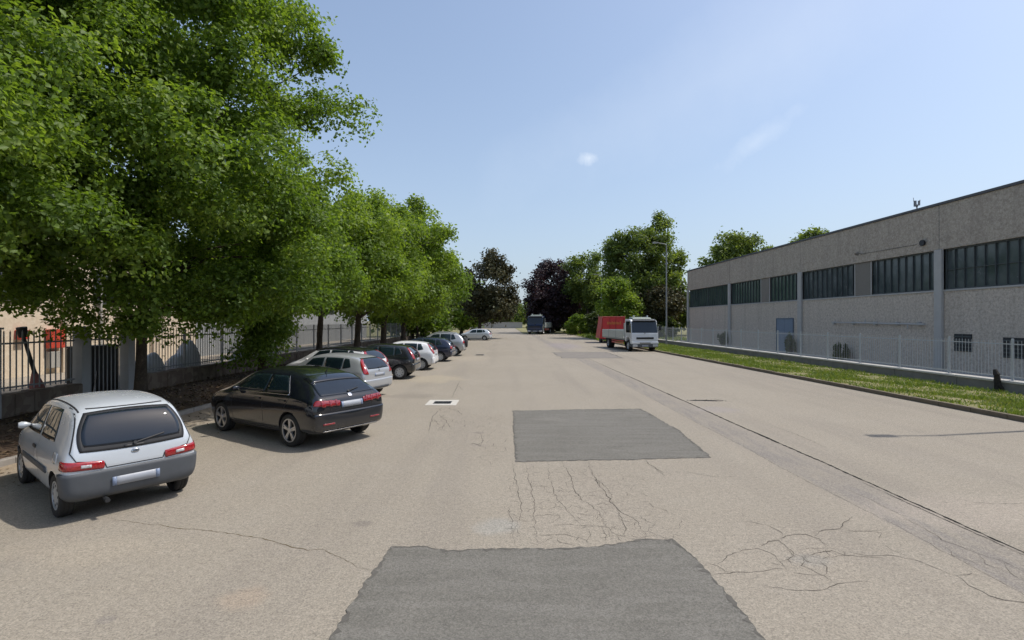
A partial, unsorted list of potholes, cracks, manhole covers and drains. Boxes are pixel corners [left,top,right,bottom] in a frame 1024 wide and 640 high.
crack [428,381,507,464]
crack [504,462,682,544]
crack [618,381,1024,603]
crack [114,519,370,570]
